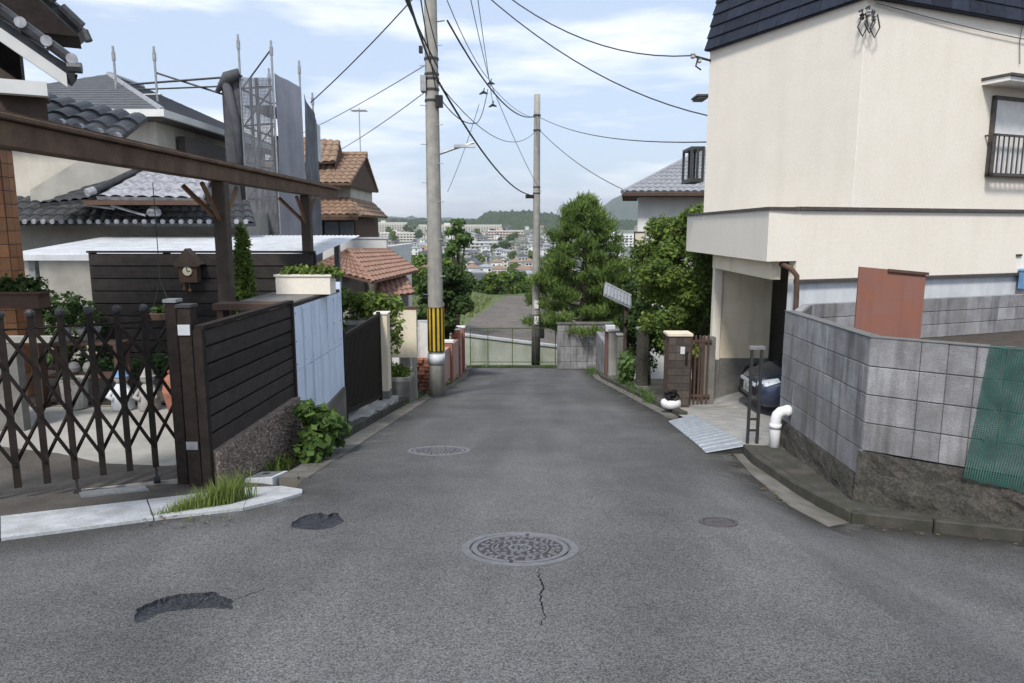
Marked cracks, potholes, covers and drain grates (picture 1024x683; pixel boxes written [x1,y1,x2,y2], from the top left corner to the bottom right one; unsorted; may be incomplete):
manhole cover [462,532,578,566]
manhole cover [407,446,470,456]
pothole [128,591,234,626]
crack [537,568,546,626]
utility cover [699,517,738,527]
pothole [288,511,346,530]
